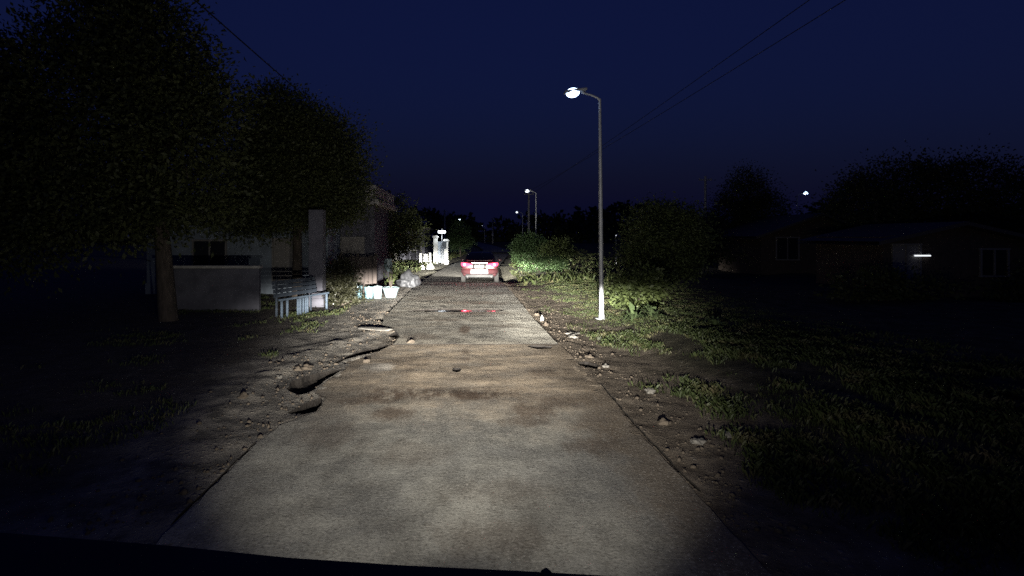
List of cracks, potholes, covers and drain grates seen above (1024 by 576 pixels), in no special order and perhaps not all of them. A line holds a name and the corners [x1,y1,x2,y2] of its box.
pothole [287,370,339,395]
pothole [288,397,323,414]
